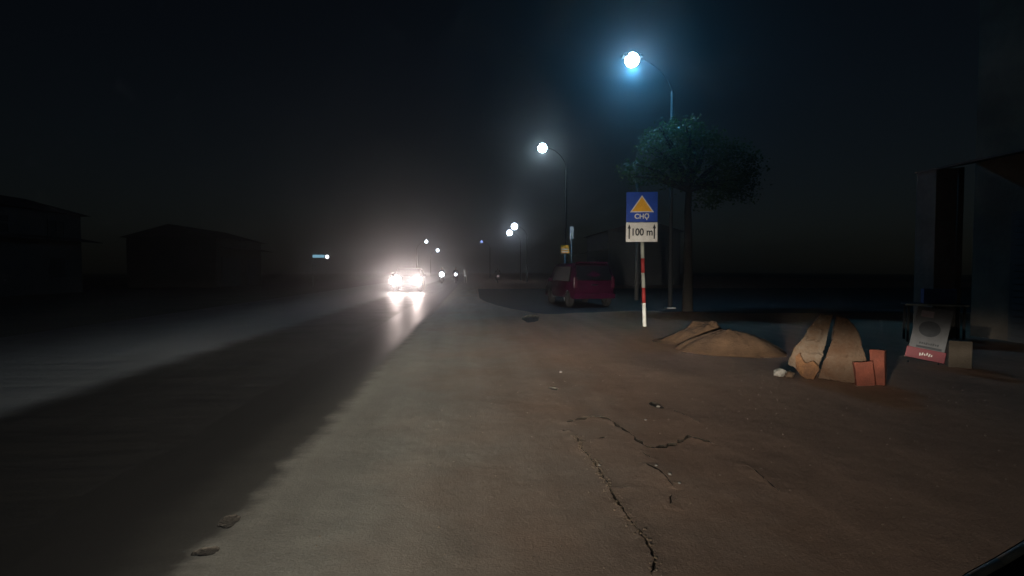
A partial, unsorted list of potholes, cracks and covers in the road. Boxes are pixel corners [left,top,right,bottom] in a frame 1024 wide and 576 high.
crack [562,410,714,575]
